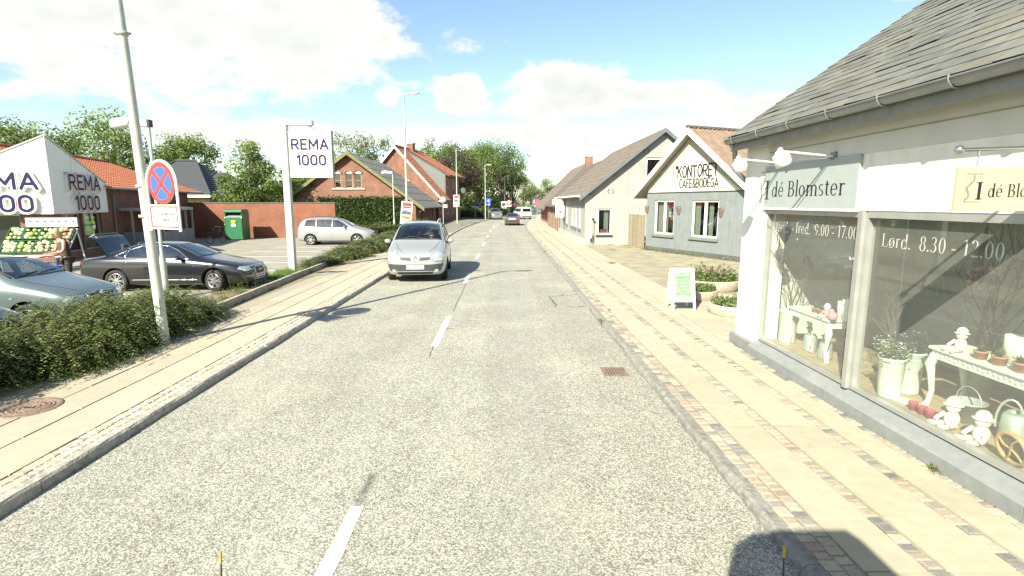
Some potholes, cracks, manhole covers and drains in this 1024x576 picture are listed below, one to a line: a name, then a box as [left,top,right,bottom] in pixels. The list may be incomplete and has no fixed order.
manhole cover [0,397,65,419]
